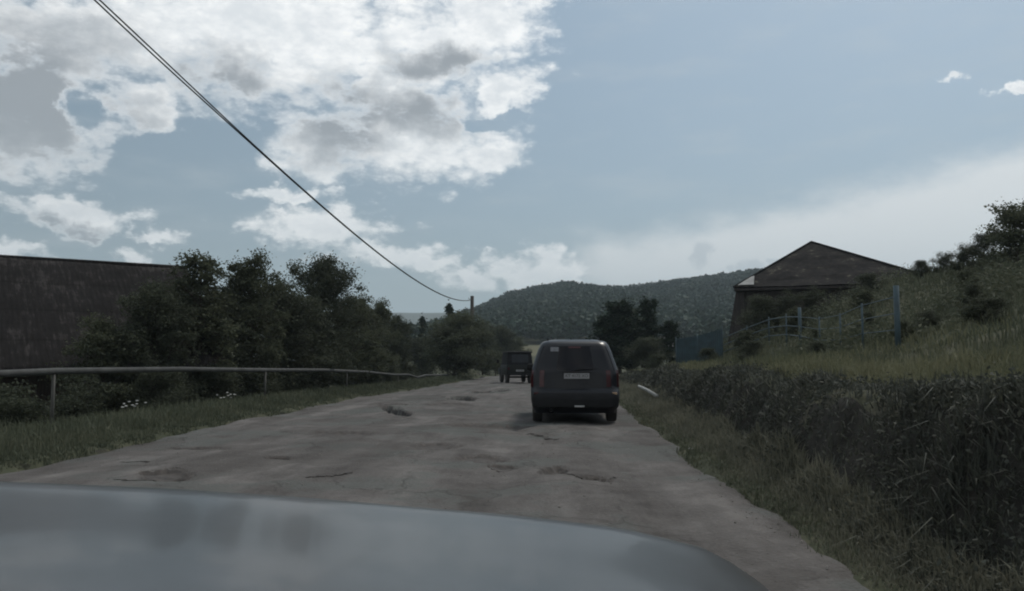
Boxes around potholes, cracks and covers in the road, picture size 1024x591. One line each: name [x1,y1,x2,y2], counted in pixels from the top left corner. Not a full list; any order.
pothole [537,466,569,475]
pothole [137,468,195,482]
pothole [487,464,519,472]
